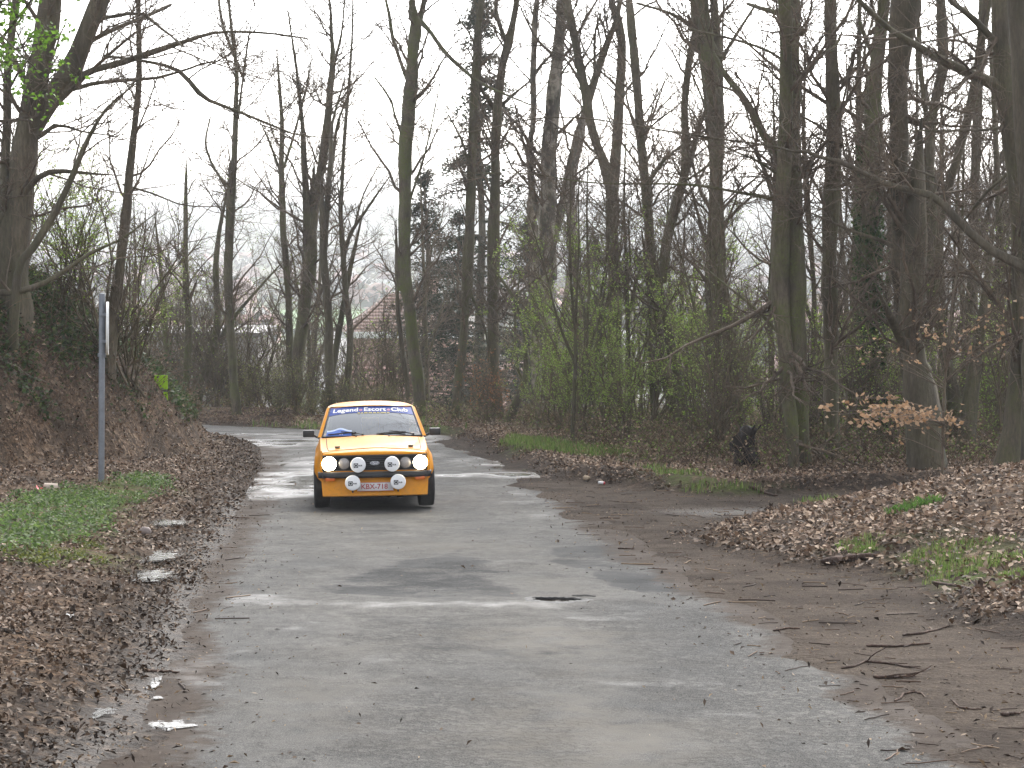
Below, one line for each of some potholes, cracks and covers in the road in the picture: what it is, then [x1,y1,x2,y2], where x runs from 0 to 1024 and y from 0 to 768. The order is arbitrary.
pothole [524,596,593,604]
